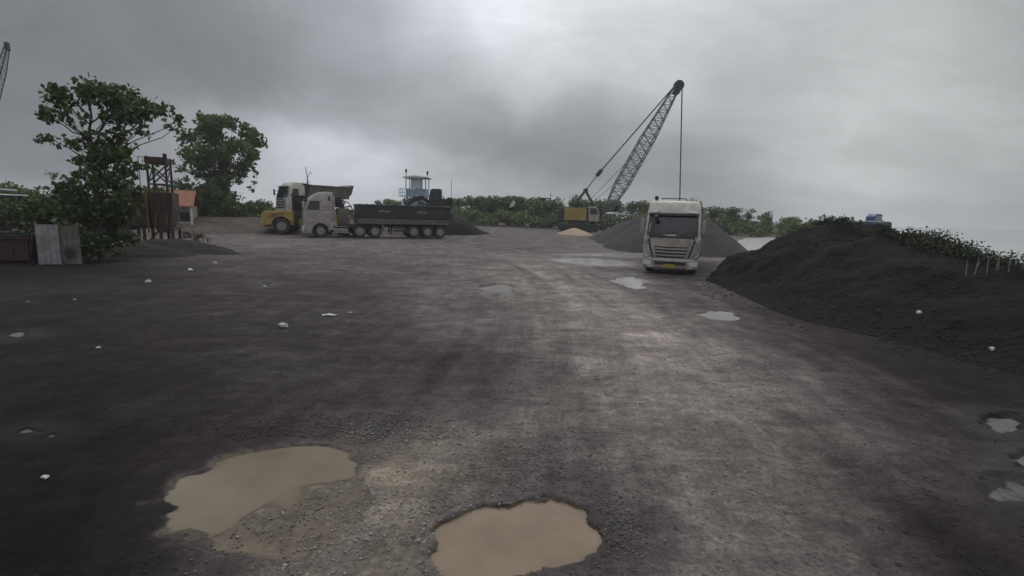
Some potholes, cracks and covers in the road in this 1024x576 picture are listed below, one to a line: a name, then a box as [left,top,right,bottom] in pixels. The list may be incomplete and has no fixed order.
pothole [475,282,526,293]
pothole [420,488,612,576]
pothole [966,407,1024,442]
pothole [690,310,752,321]
pothole [133,437,383,574]
pothole [600,272,656,290]
